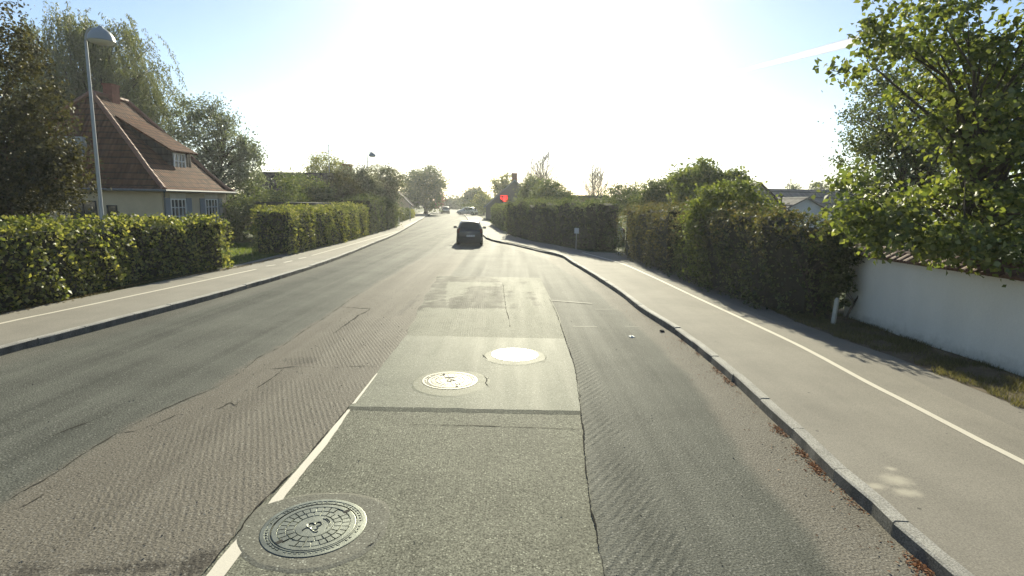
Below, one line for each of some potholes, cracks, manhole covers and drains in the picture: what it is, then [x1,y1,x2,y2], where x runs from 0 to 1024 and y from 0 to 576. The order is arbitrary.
manhole cover [483,348,547,366]
manhole cover [411,371,490,398]
manhole cover [234,492,390,573]
